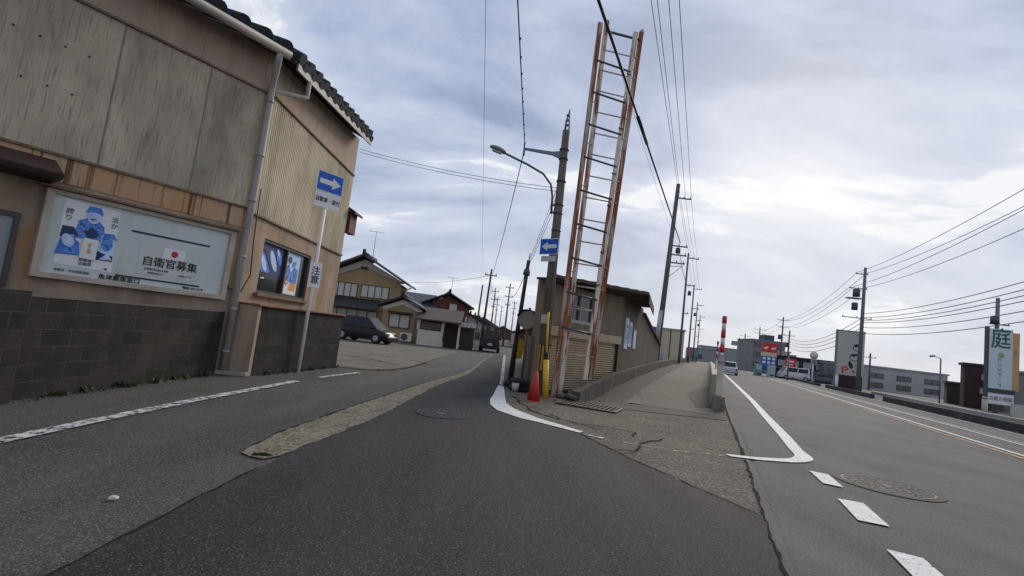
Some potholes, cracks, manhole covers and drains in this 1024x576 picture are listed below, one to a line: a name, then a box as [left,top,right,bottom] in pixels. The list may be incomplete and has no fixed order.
manhole cover [833,472,947,502]
manhole cover [413,408,469,419]
crack [511,395,789,576]
drain grate [554,399,623,413]
